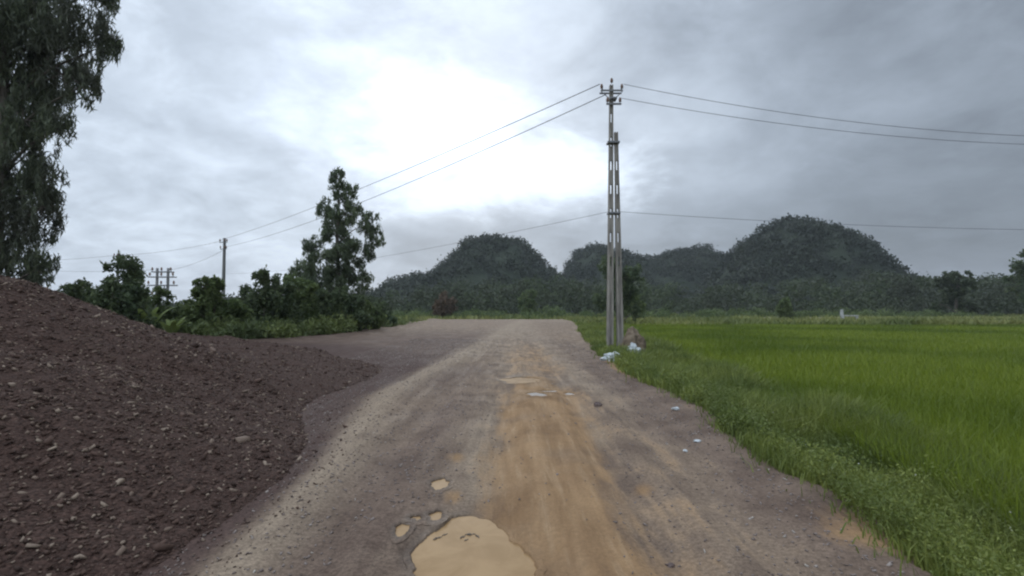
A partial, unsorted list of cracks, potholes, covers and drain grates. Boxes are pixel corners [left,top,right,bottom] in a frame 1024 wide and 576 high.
pothole [493,376,547,385]
pothole [423,506,448,525]
pothole [402,511,547,576]
pothole [425,475,456,494]
pothole [389,518,416,543]
